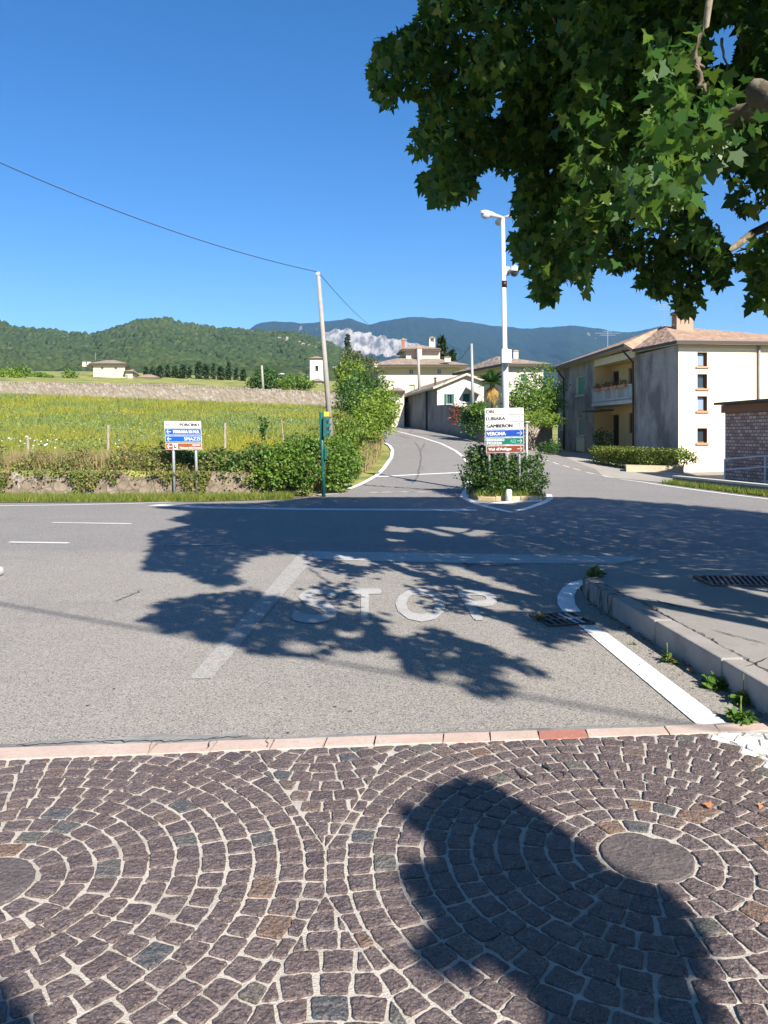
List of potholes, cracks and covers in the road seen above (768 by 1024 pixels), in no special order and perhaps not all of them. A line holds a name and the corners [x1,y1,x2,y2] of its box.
drain grate [693,575,768,587]
crack [631,597,768,666]
crack [20,735,244,749]
drain grate [529,612,596,627]
